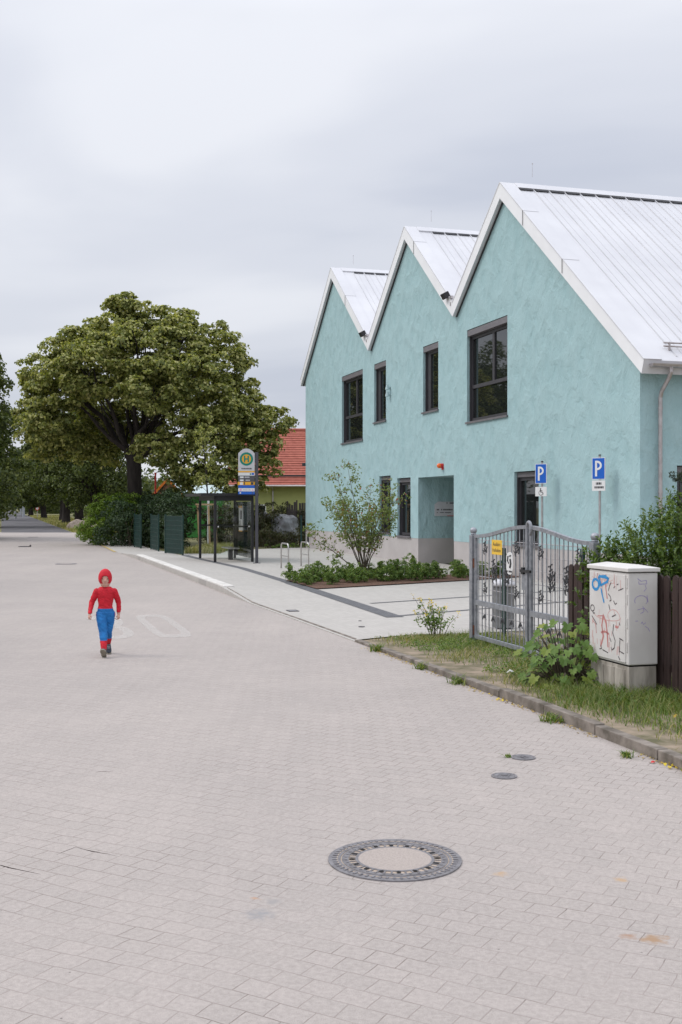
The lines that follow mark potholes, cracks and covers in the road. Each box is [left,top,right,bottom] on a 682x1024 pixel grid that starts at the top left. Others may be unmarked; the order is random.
utility cover [491,772,517,780]
manhole cover [328,839,462,882]
